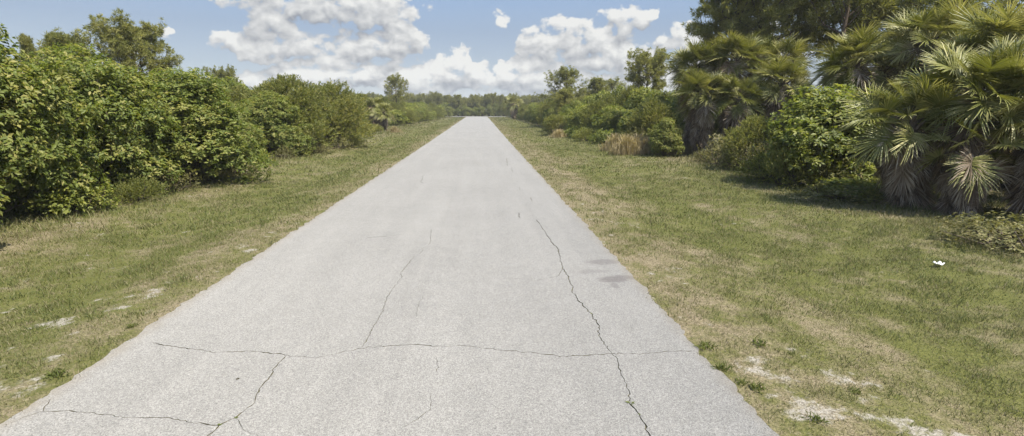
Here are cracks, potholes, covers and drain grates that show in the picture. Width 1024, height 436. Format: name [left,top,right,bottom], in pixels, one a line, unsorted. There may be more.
crack [8,221,674,436]
